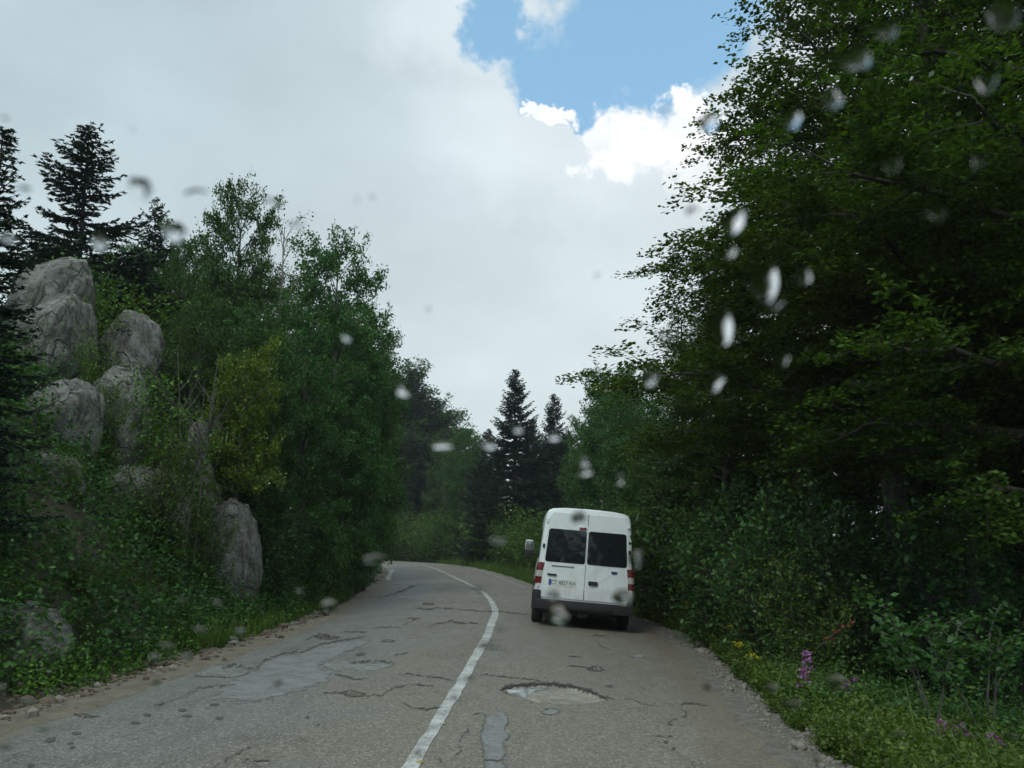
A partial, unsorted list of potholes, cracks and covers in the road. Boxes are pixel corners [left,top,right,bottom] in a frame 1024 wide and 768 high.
pothole [502,683,607,705]
crack [153,585,526,710]
crack [484,633,708,737]
